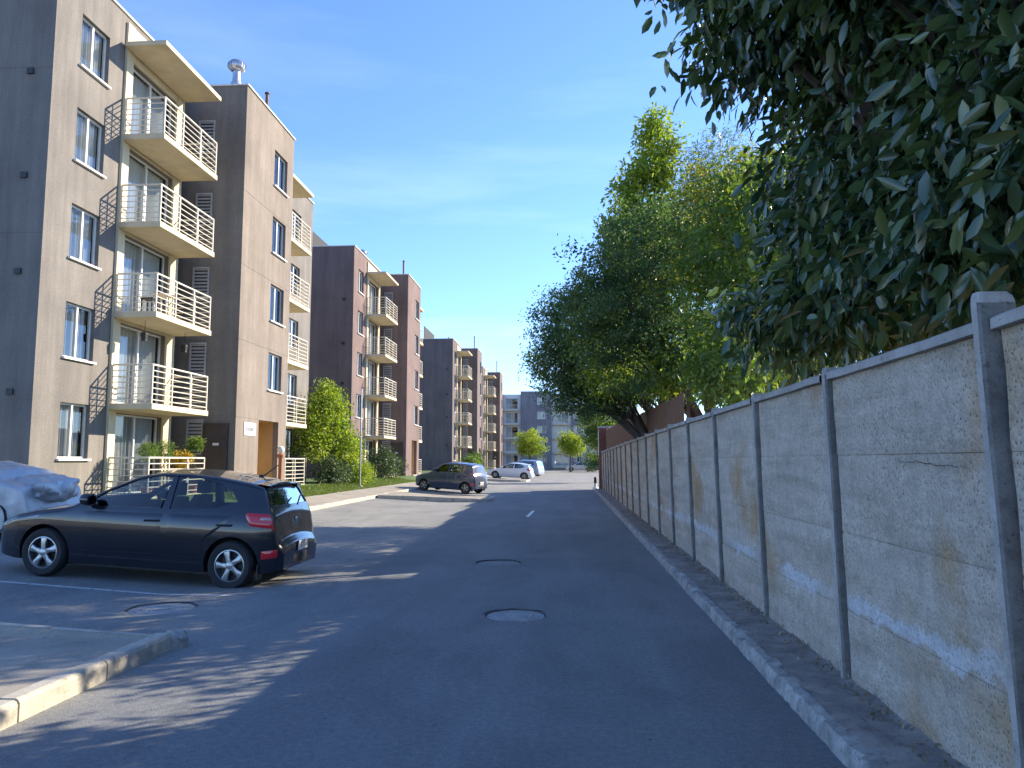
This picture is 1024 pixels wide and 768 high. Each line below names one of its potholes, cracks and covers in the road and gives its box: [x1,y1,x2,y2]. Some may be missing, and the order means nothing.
manhole cover [483,609,546,621]
manhole cover [124,602,199,615]
